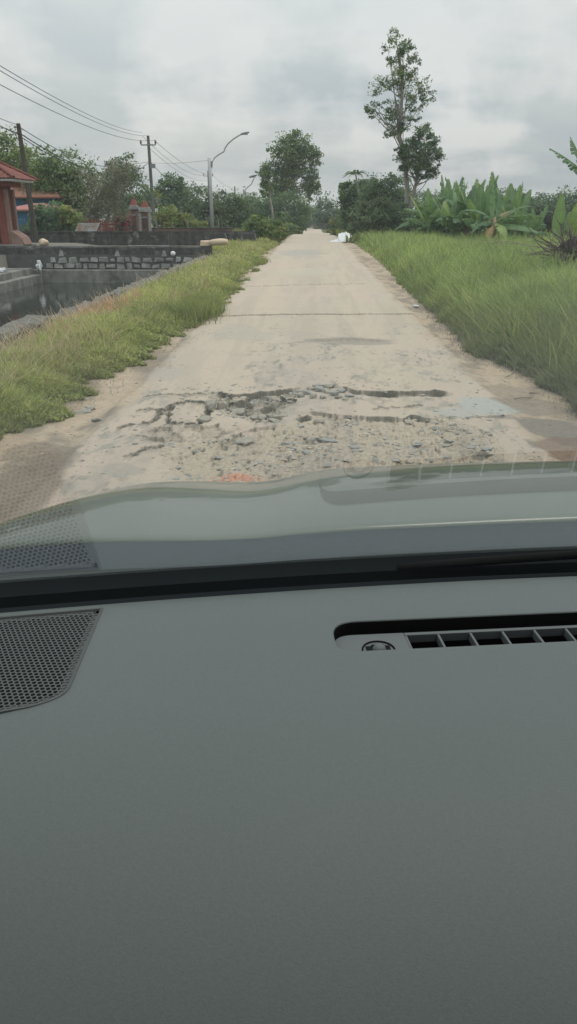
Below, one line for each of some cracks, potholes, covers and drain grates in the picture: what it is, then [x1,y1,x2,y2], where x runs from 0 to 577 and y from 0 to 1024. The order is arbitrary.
pothole [203,386,307,423]
pothole [157,411,507,482]
pothole [139,422,255,444]
